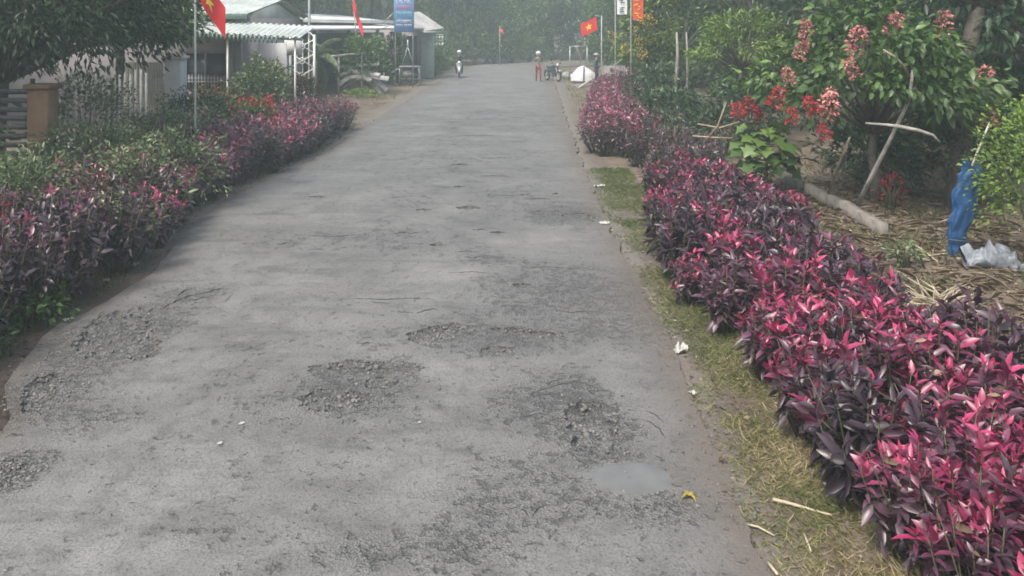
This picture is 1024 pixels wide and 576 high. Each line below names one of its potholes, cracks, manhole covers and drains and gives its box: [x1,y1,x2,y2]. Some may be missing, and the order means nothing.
pothole [488,327,565,342]
pothole [365,376,399,390]
pothole [480,346,514,355]
crack [345,298,434,313]
crack [628,410,666,439]
pothole [19,372,67,413]
pothole [405,322,477,343]
pothole [307,360,427,378]
pothole [294,388,370,413]
pothole [0,459,37,487]
pothole [564,400,622,459]
crack [164,287,225,308]
